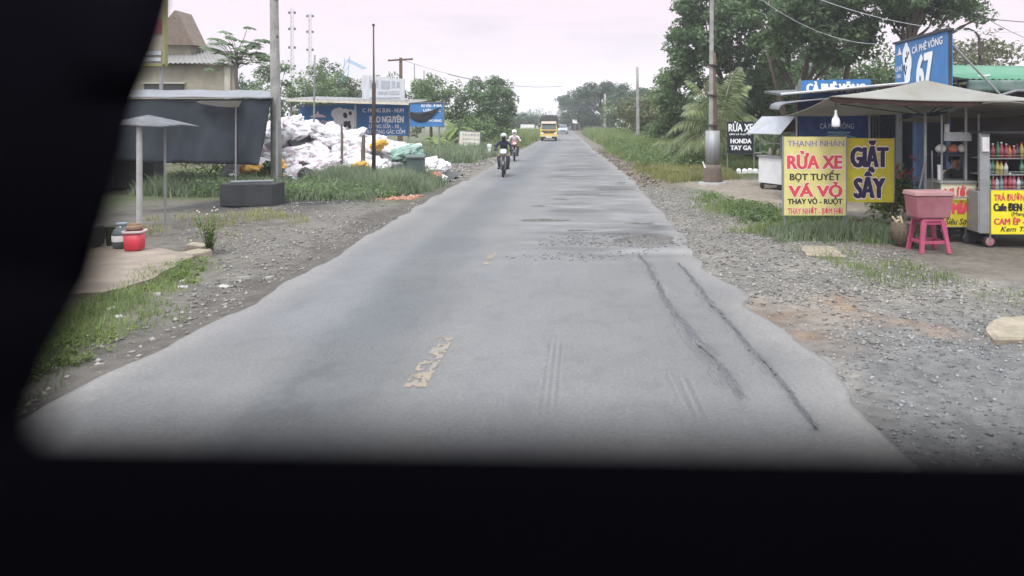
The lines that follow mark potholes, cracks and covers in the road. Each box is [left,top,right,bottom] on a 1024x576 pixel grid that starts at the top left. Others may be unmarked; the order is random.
crack [633,254,828,432]
pothole [607,234,683,247]
